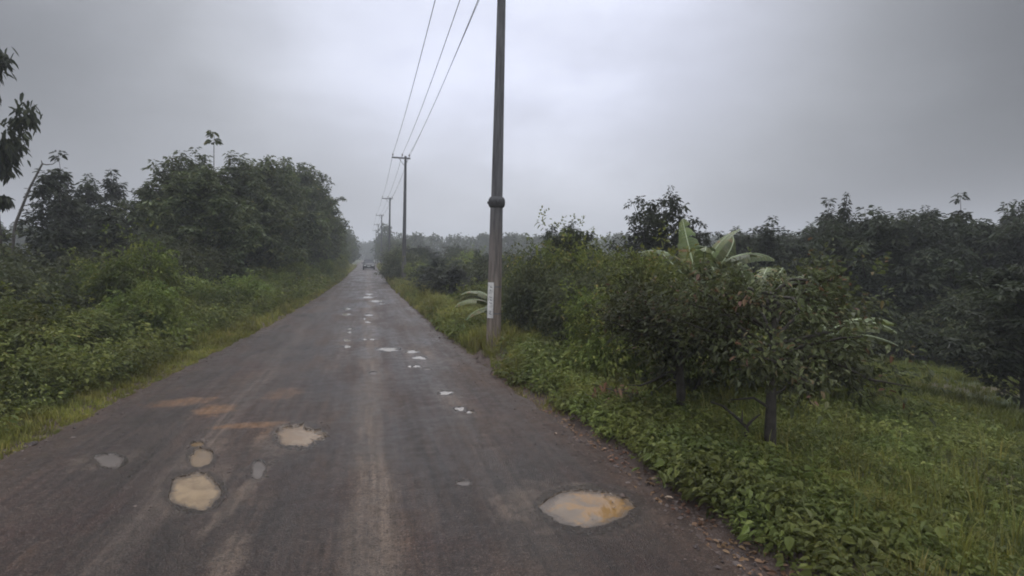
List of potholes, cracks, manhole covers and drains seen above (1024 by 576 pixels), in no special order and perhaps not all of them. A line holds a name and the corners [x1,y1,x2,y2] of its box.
pothole [252,460,267,479]
pothole [275,422,330,447]
pothole [168,471,222,510]
pothole [538,489,637,528]
pothole [94,453,124,468]
pothole [189,446,214,468]
